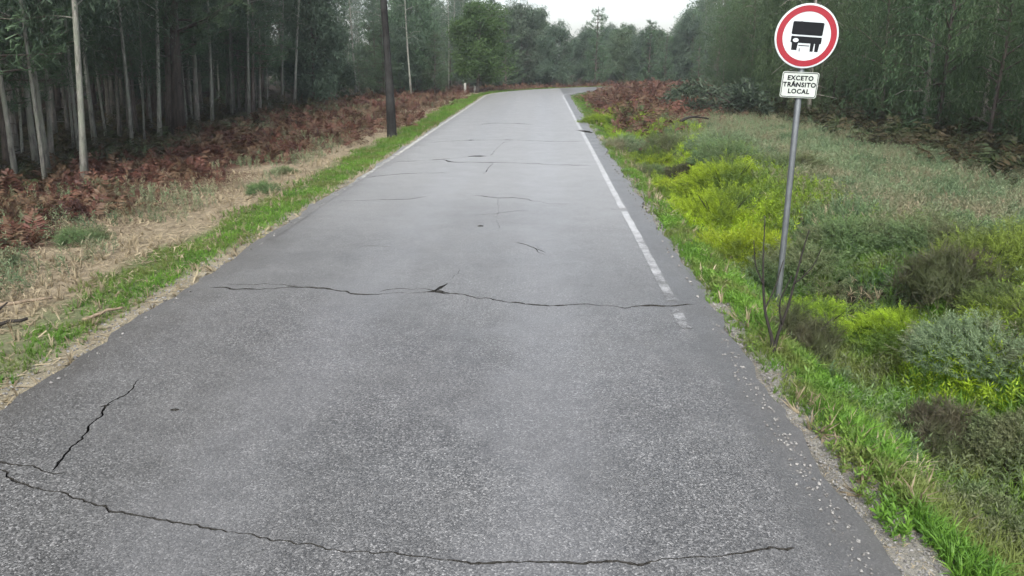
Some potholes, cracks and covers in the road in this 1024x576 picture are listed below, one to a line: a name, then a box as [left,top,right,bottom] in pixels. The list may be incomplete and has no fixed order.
crack [0,380,793,566]
crack [213,270,691,309]
crack [367,123,593,178]
